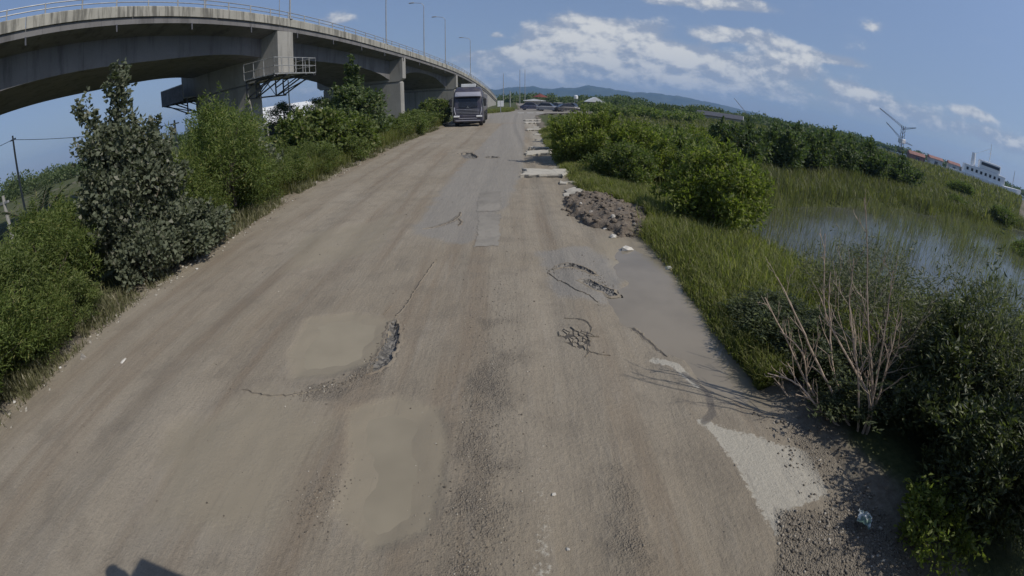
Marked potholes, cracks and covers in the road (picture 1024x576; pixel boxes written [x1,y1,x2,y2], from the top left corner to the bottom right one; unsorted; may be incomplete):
crack [630,327,668,357]
crack [242,388,321,397]
pothole [576,278,622,298]
crack [383,259,437,318]
crack [547,272,611,357]
crack [423,212,463,229]
pothole [364,318,404,376]
